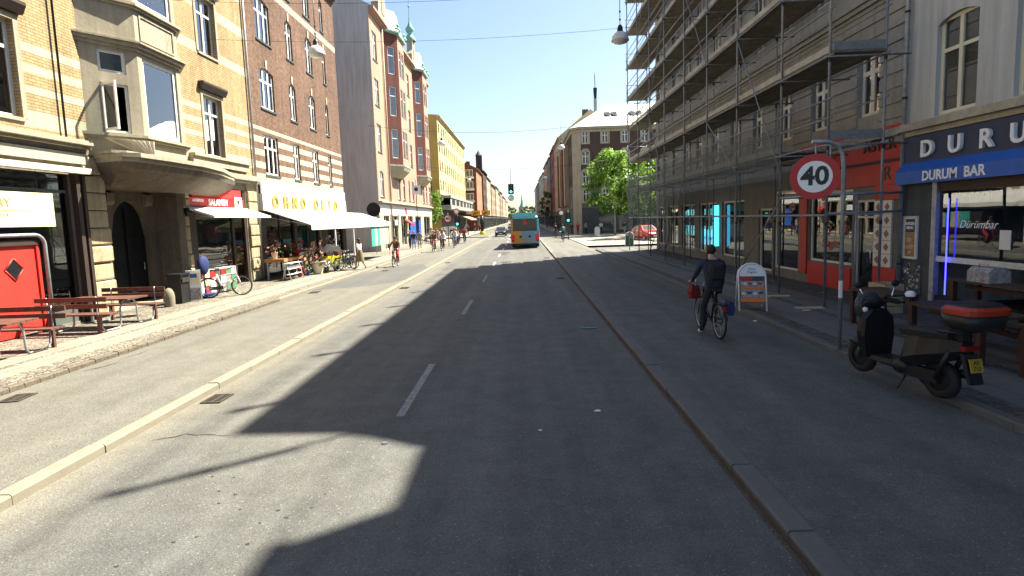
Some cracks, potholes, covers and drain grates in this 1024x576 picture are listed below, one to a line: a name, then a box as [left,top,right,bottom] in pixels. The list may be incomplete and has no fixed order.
drain grate [0,393,38,403]
drain grate [200,393,234,404]
